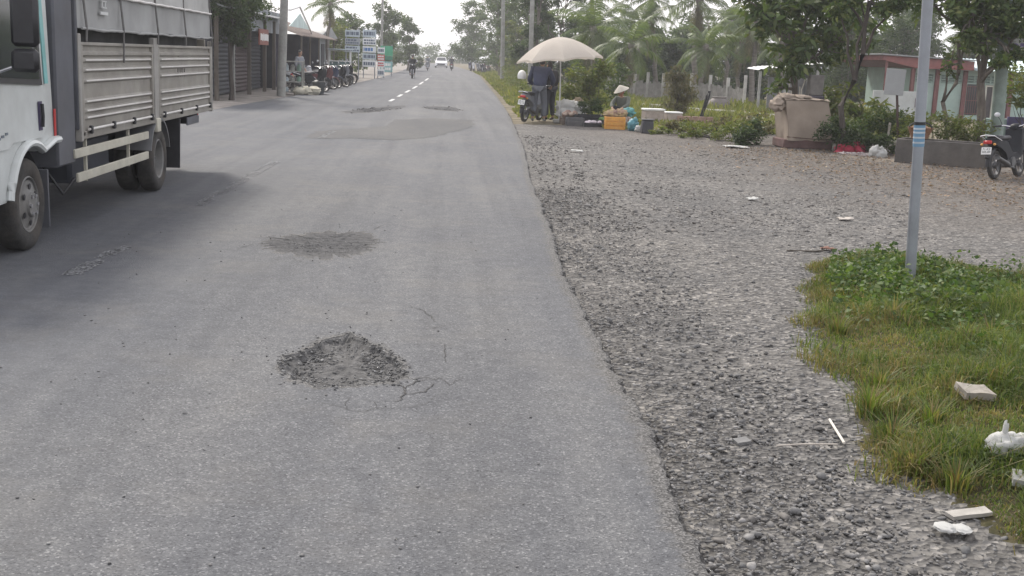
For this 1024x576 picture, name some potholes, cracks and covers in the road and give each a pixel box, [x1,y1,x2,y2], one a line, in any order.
pothole [342,105,406,113]
crack [321,306,459,411]
pothole [244,230,396,263]
pothole [266,326,421,391]
